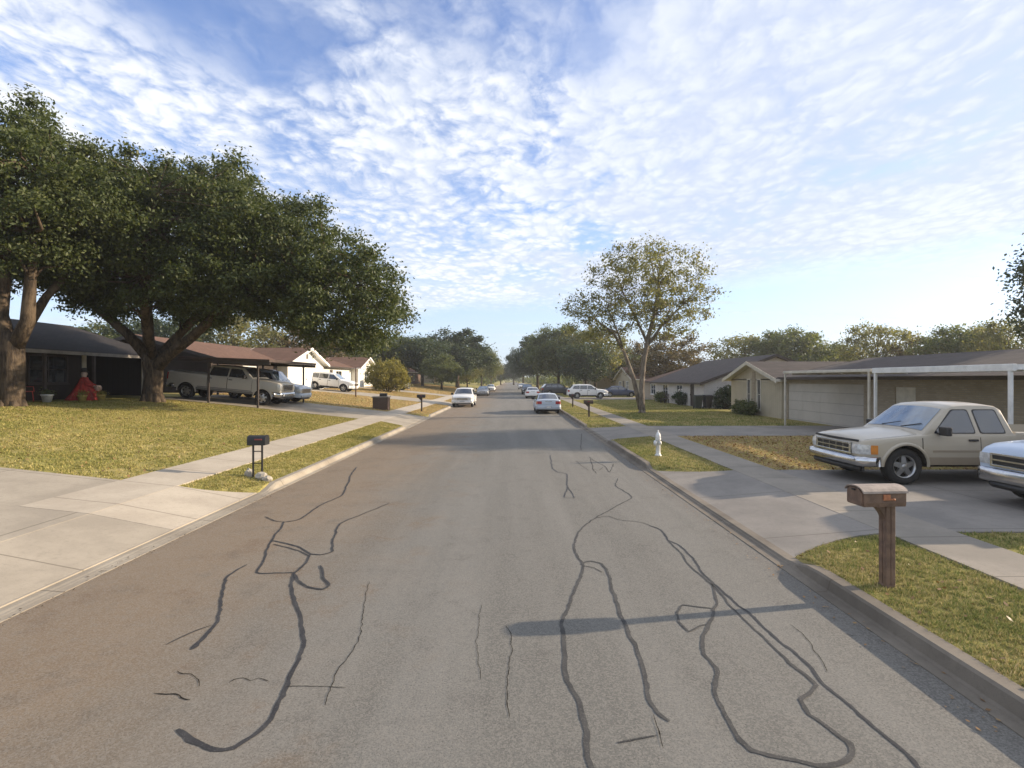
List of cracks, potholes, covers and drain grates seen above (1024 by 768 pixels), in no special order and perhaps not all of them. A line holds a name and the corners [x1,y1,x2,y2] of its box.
crack [156,671,200,700]
crack [287,582,370,704]
